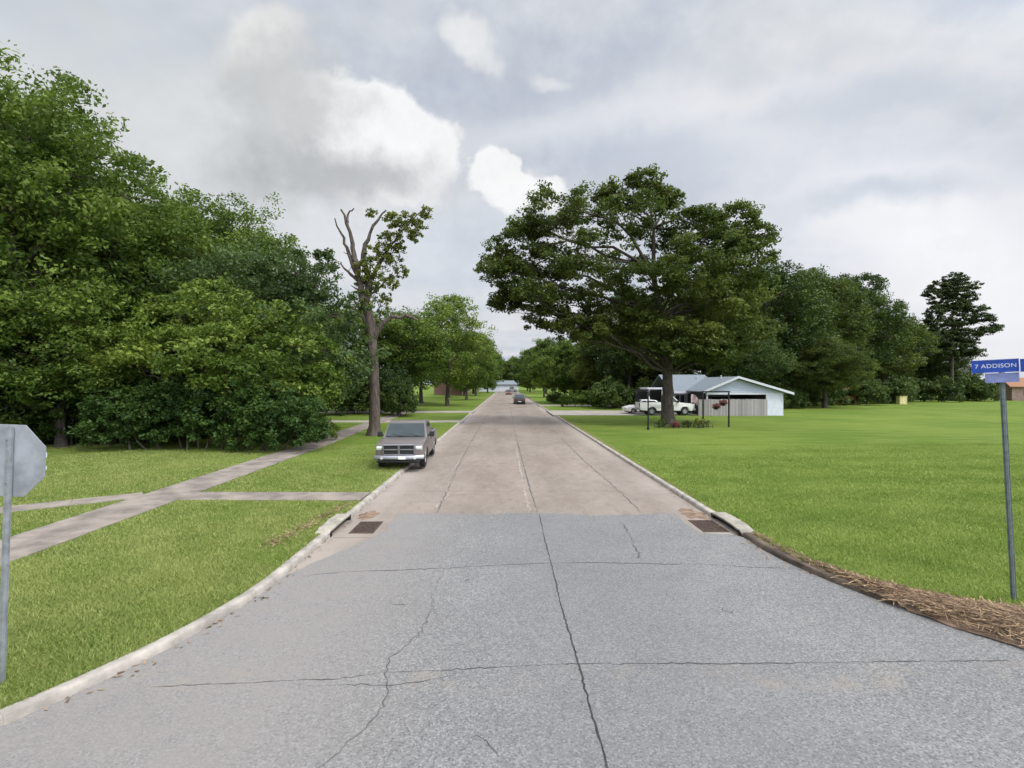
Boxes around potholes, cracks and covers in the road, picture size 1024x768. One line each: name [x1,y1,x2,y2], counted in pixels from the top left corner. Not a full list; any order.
drain grate [315,514,383,537]
drain grate [688,512,754,536]
crack [149,514,1015,768]
